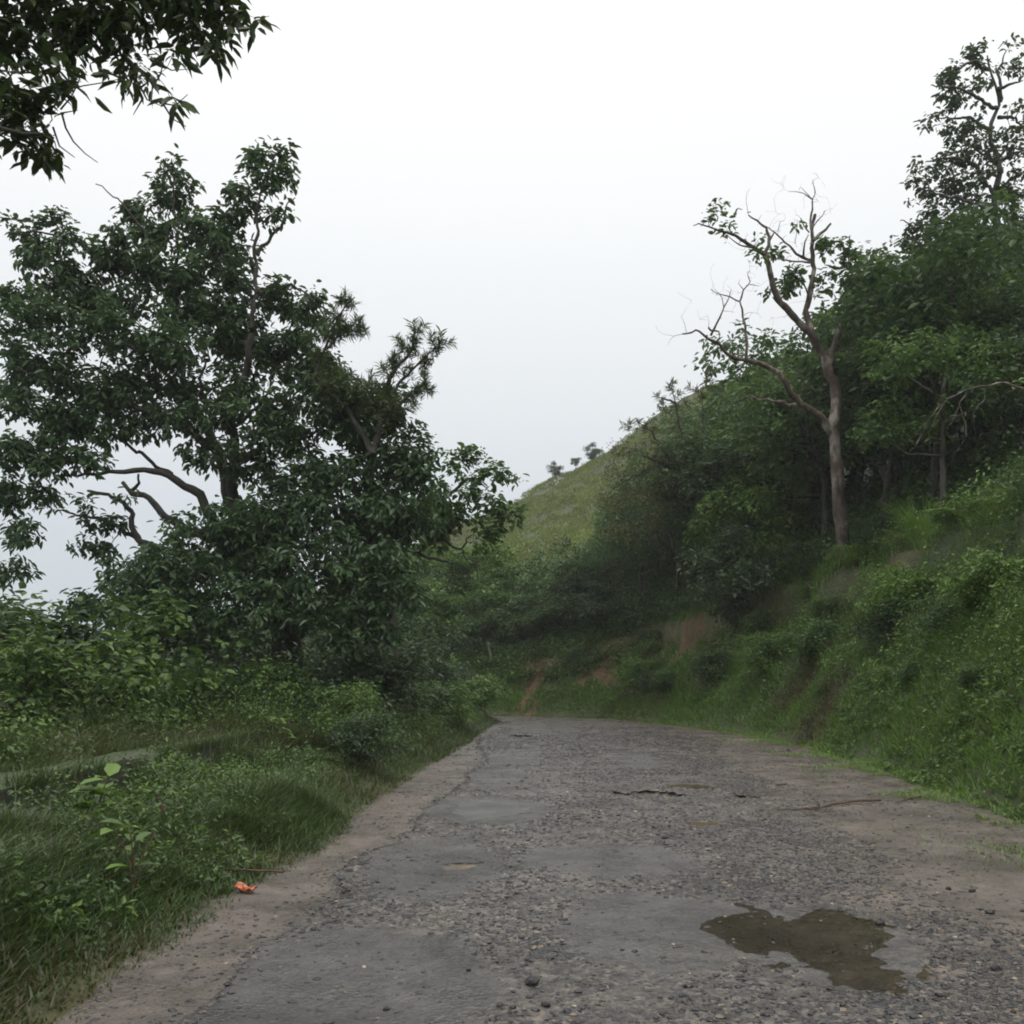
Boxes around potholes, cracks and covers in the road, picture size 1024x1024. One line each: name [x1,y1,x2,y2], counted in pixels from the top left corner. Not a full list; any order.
pothole [661,902,932,997]
pothole [661,782,722,790]
pothole [680,819,724,827]
